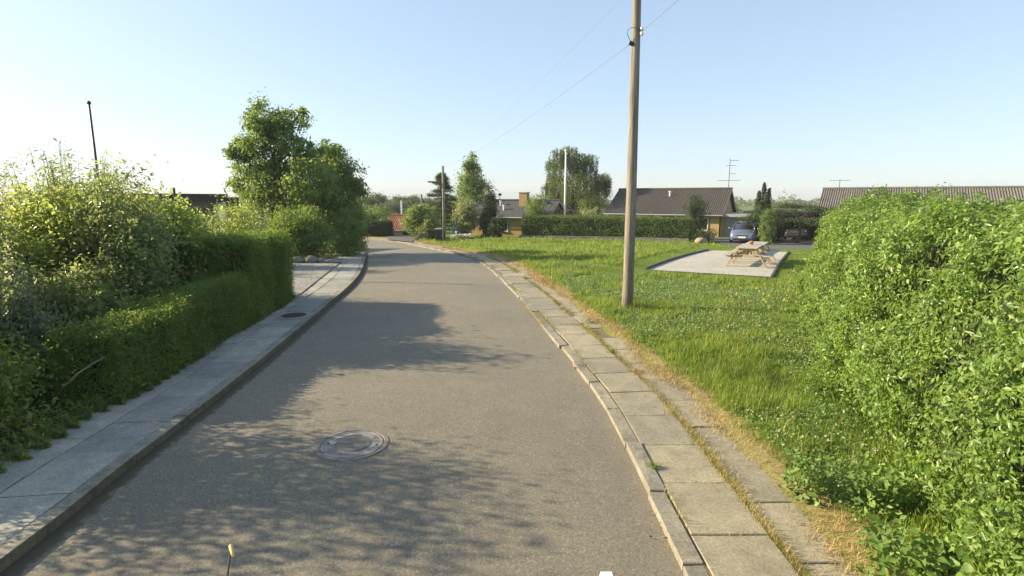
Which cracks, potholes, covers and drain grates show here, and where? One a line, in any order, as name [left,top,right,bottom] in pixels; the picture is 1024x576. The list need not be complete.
manhole cover [315,429,389,461]
